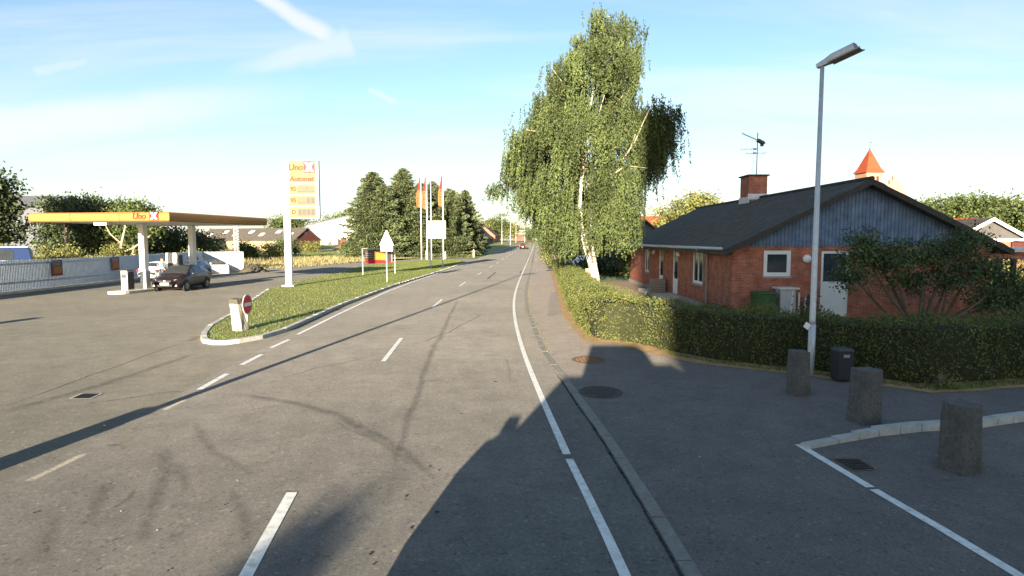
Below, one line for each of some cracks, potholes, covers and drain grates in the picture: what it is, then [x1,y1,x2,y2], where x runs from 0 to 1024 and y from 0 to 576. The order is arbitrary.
drain grate [831,458,878,471]
manhole cover [572,356,606,364]
manhole cover [579,386,623,398]
